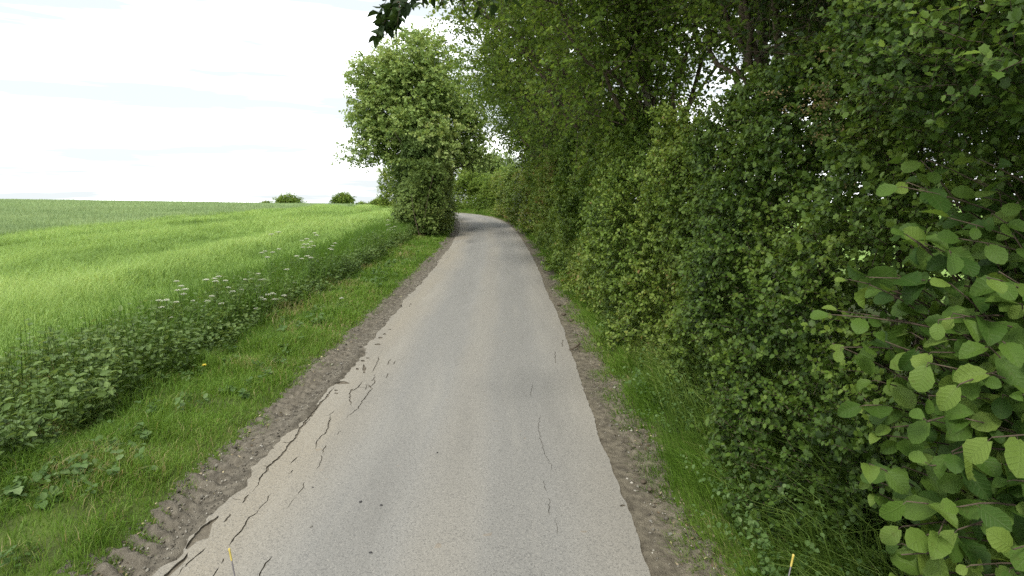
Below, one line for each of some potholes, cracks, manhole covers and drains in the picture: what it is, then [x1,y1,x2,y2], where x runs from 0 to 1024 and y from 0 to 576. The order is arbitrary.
crack [179,357,395,576]
